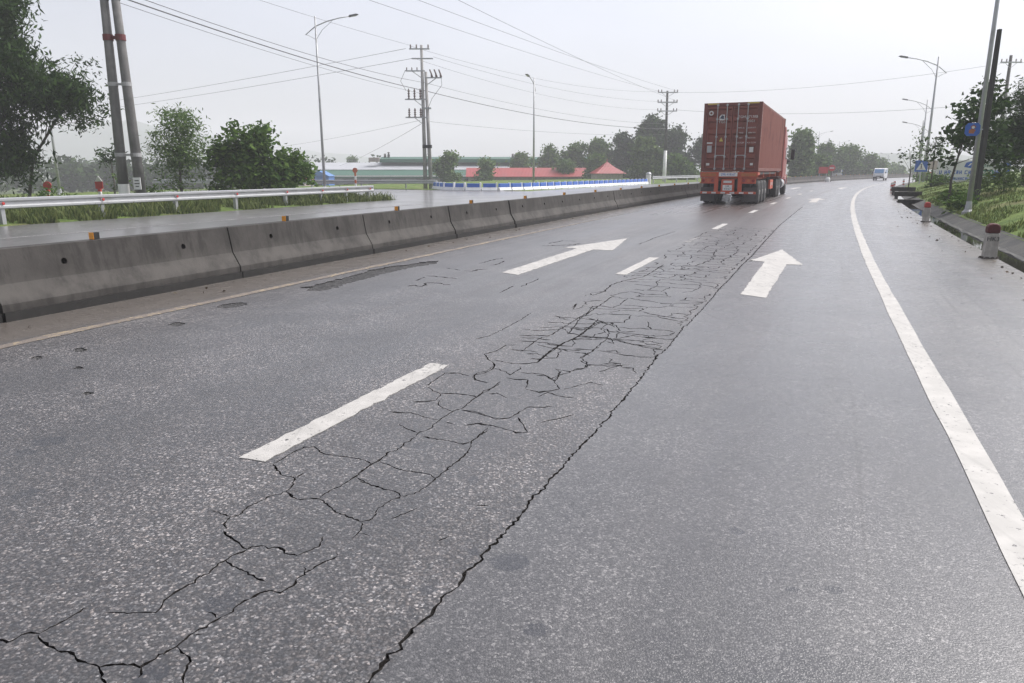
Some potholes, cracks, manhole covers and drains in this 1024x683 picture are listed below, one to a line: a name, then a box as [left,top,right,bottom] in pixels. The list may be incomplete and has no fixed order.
crack [0,208,801,683]
pothole [301,261,438,291]
